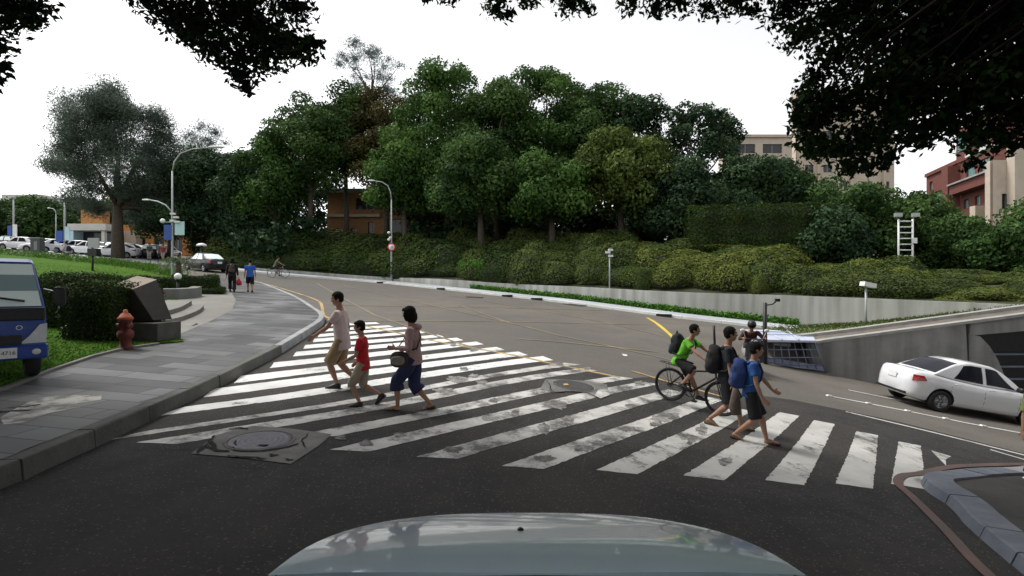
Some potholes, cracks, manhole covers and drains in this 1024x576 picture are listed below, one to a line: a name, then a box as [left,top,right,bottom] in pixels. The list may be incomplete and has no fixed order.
manhole cover [552,380,596,392]
manhole cover [223,430,296,451]
